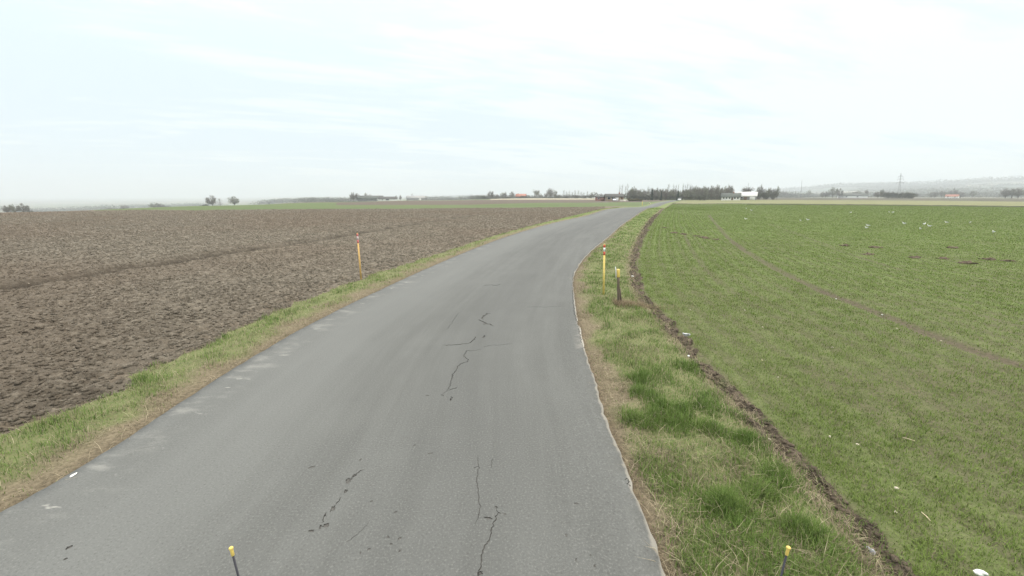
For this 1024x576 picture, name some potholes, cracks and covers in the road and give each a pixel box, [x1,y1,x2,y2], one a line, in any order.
crack [474,457,499,576]
crack [441,313,512,401]
